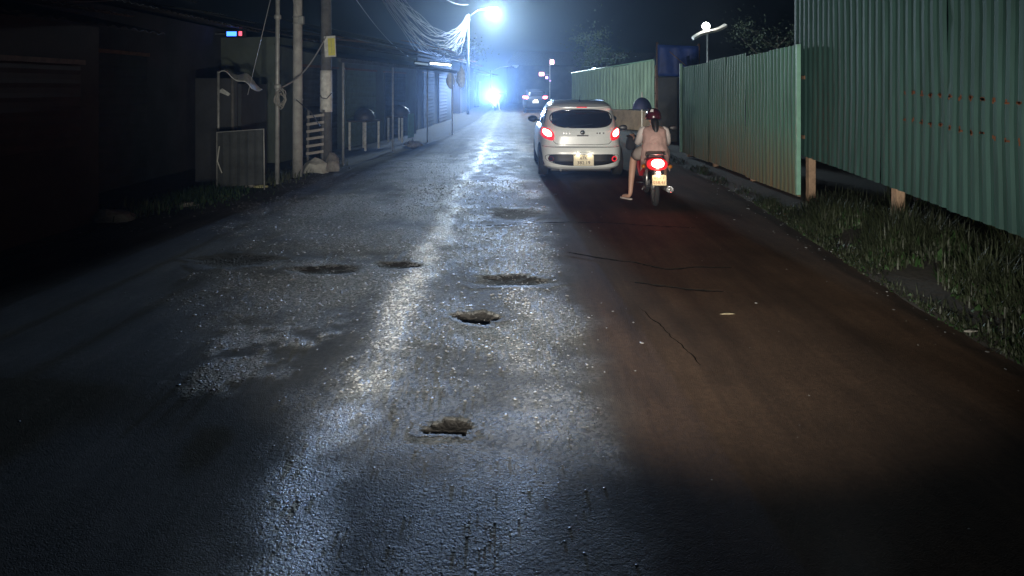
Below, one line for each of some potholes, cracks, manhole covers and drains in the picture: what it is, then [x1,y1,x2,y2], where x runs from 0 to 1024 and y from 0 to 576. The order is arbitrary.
pothole [409,414,486,440]
pothole [459,272,576,289]
pothole [265,263,371,277]
pothole [363,260,438,270]
pothole [480,207,560,224]
crack [554,248,746,373]
pothole [441,307,511,328]
